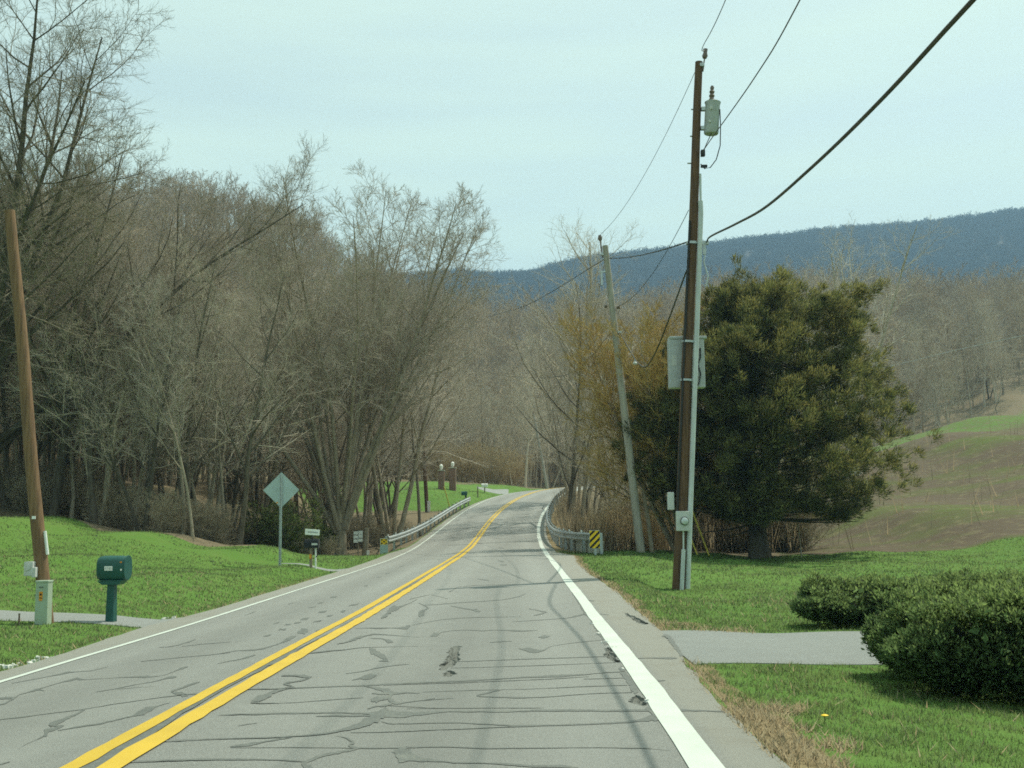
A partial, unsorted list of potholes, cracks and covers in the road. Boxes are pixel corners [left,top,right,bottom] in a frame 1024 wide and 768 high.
pothole [628,695,648,706]
crack [0,639,255,730]
crack [220,541,727,751]
pothole [439,646,463,670]
pothole [604,647,621,663]
